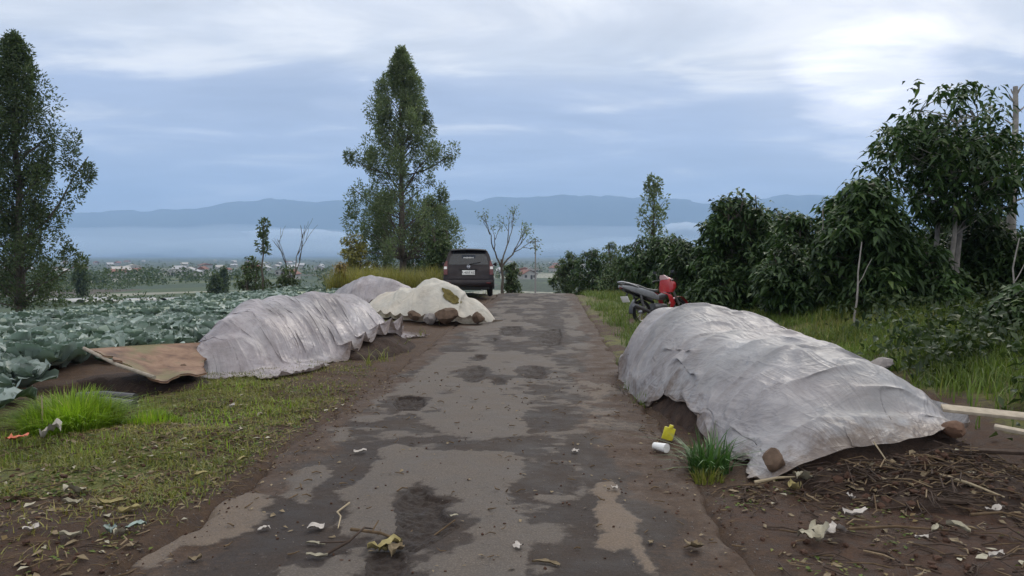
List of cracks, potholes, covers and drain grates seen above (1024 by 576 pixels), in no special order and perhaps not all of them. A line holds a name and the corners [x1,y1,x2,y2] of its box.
pothole [525,366,548,379]
pothole [460,366,488,382]
pothole [538,328,564,347]
pothole [386,486,459,552]
pothole [392,396,426,411]
pothole [499,327,523,336]
